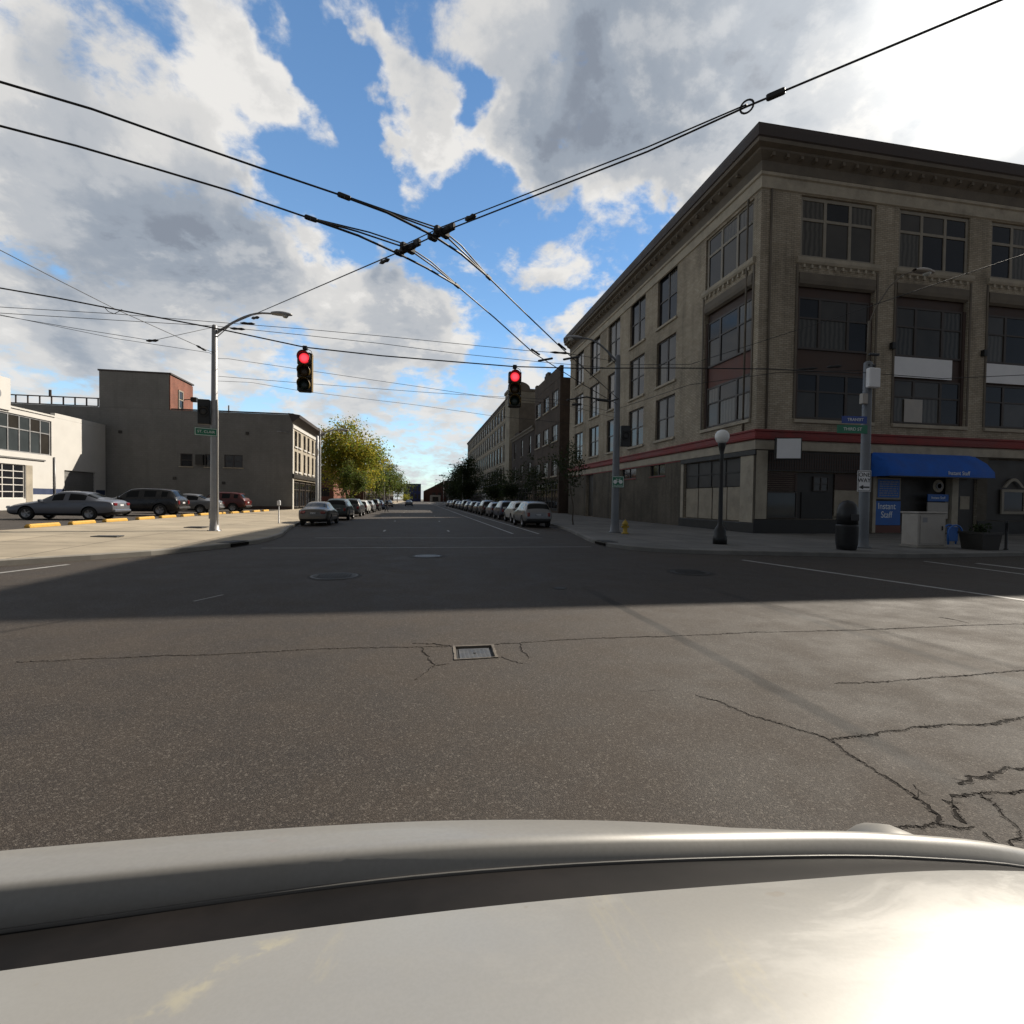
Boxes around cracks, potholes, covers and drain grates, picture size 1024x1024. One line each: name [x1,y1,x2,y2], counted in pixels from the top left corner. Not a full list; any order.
crack [648,689,1024,847]
manhole cover [307,572,362,580]
crack [834,670,1024,684]
